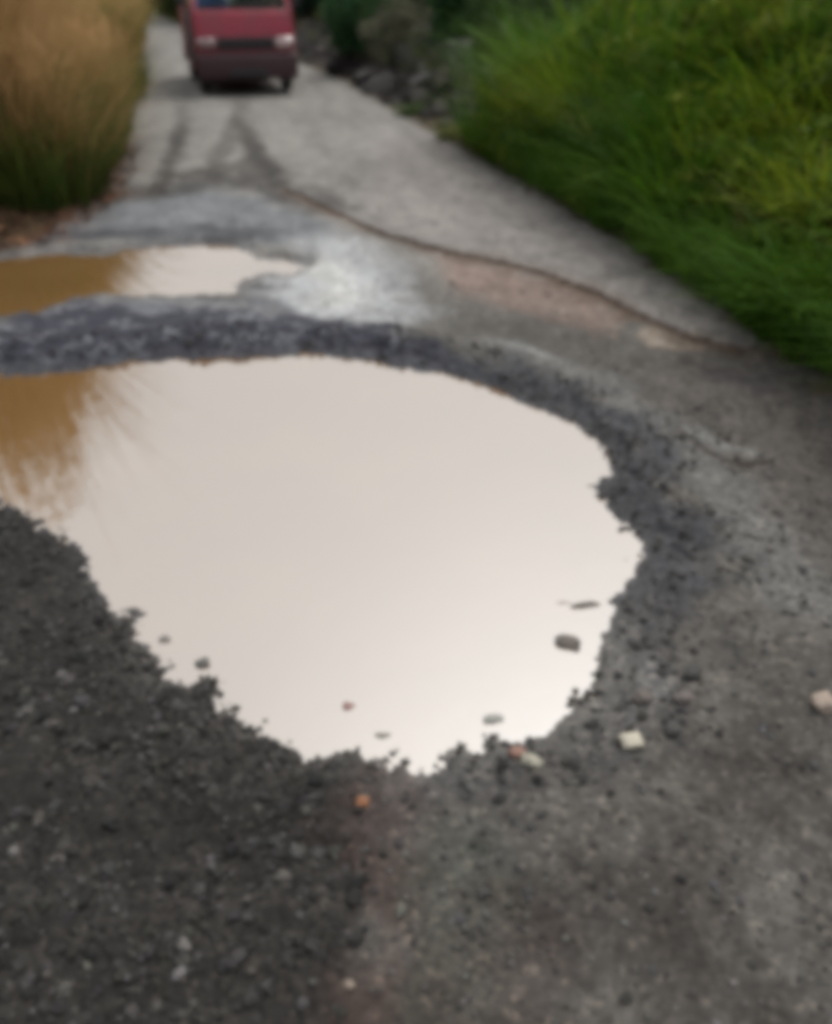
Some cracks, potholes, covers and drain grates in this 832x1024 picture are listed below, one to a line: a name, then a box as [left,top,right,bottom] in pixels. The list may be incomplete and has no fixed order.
crack [282,187,751,356]
pothole [0,234,323,318]
pothole [0,332,692,801]
